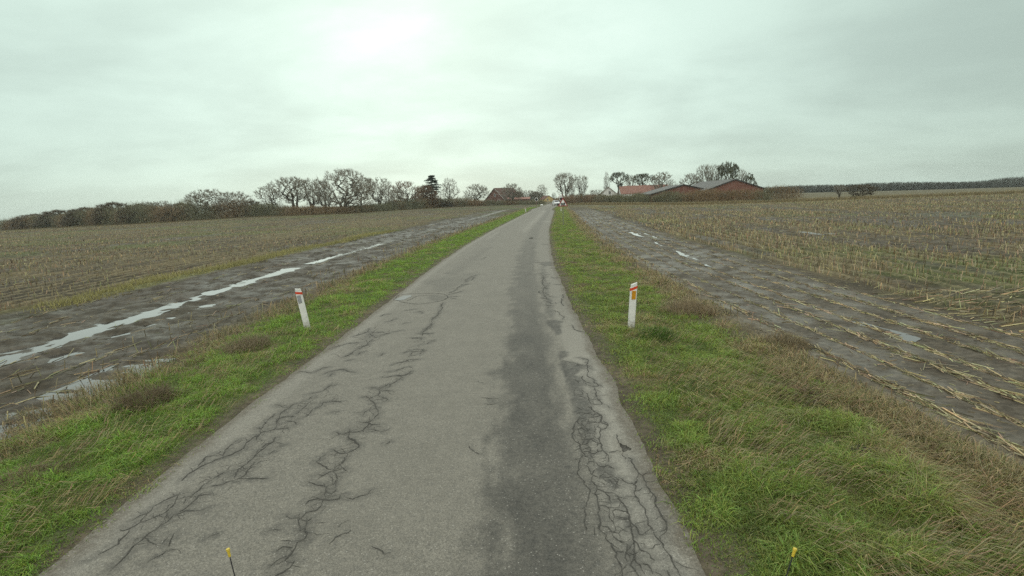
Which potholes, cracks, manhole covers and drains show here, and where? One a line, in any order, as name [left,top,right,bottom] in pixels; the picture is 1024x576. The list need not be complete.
crack [568,357,694,576]
crack [86,384,341,570]
